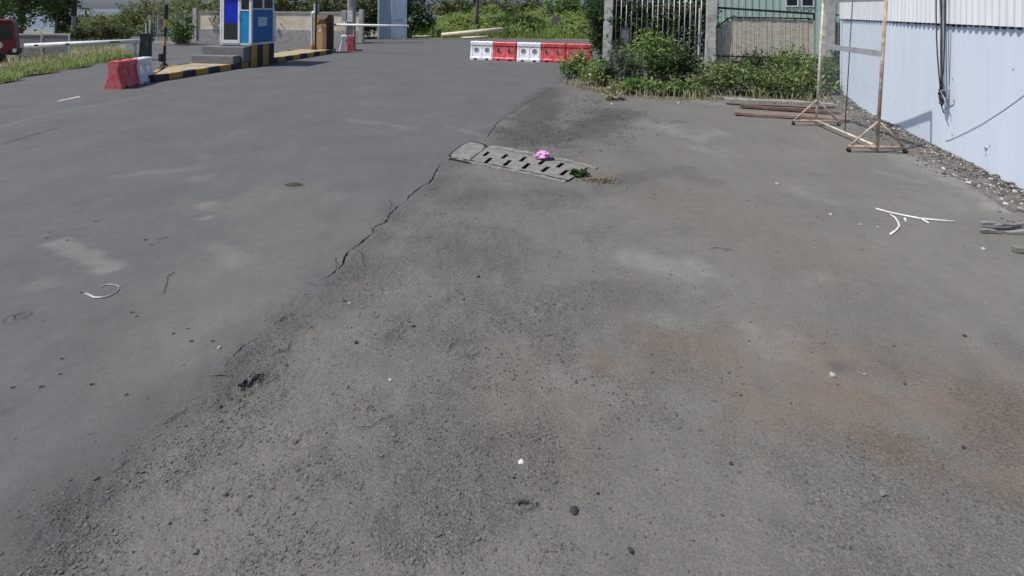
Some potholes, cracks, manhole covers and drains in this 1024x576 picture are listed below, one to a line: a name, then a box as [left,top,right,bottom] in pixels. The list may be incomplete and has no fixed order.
crack [307,160,446,287]
pothole [226,372,280,397]
drain grate [447,146,598,183]
crack [480,89,551,141]
